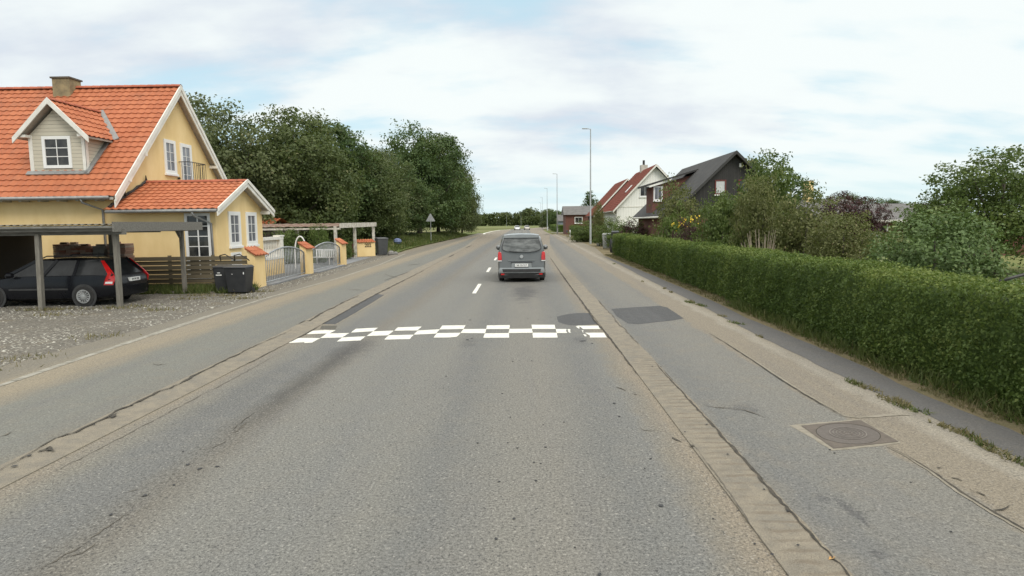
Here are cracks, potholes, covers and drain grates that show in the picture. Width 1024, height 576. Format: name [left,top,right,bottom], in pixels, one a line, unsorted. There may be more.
crack [33,514,127,572]
manhole cover [789,419,901,451]
